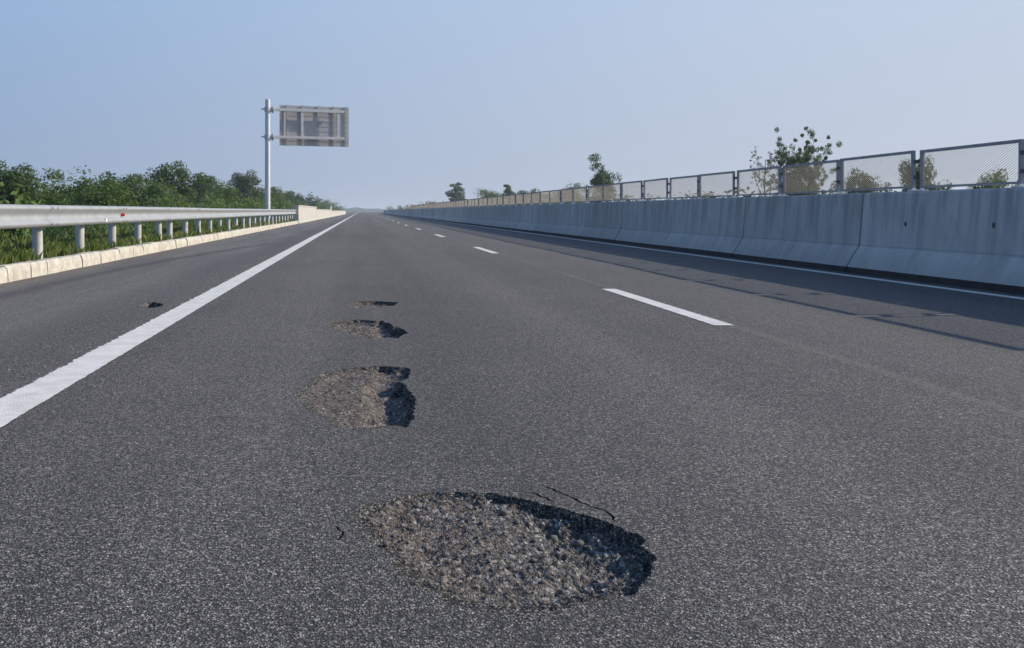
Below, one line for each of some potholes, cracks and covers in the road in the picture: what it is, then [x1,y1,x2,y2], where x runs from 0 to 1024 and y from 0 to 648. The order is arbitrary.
pothole [351,491,657,615]
pothole [327,320,407,339]
pothole [292,366,417,431]
crack [515,485,615,522]
